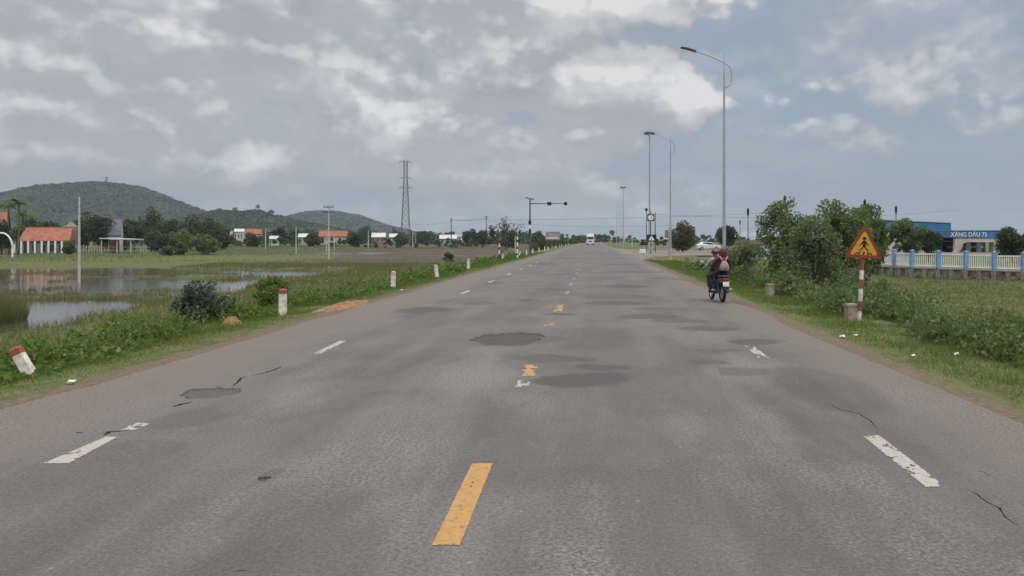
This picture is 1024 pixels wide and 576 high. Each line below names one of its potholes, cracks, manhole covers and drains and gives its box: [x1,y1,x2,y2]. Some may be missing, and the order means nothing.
pothole [470,333,545,346]
pothole [179,388,241,399]
